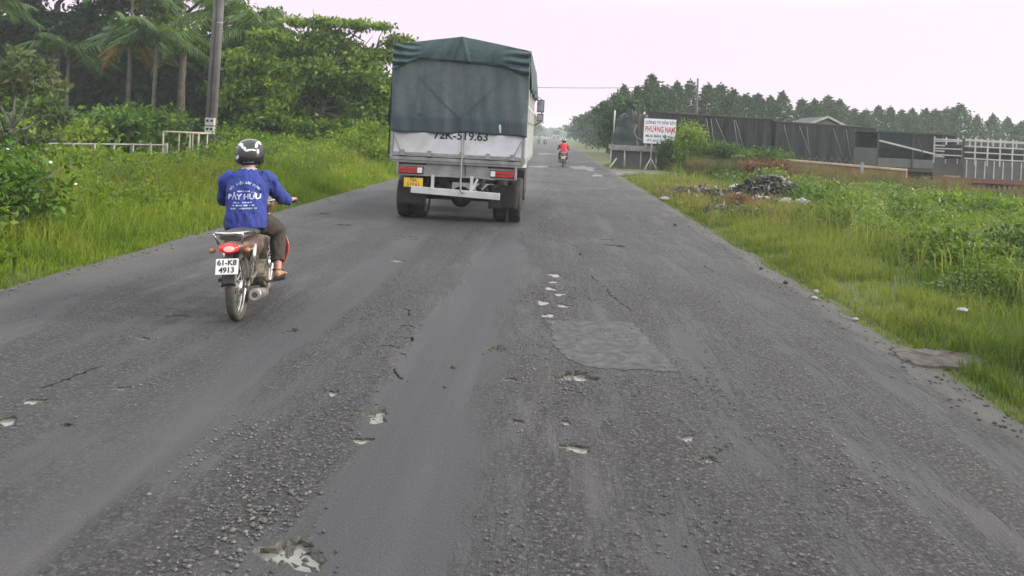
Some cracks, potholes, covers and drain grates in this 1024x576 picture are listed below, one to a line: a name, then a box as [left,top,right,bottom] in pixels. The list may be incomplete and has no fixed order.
pothole [0,415,18,427]
pothole [361,406,389,424]
crack [375,308,416,380]
pothole [252,535,327,573]
pothole [553,442,593,454]
pothole [548,370,601,381]
pothole [676,433,696,443]
crack [41,365,103,389]
